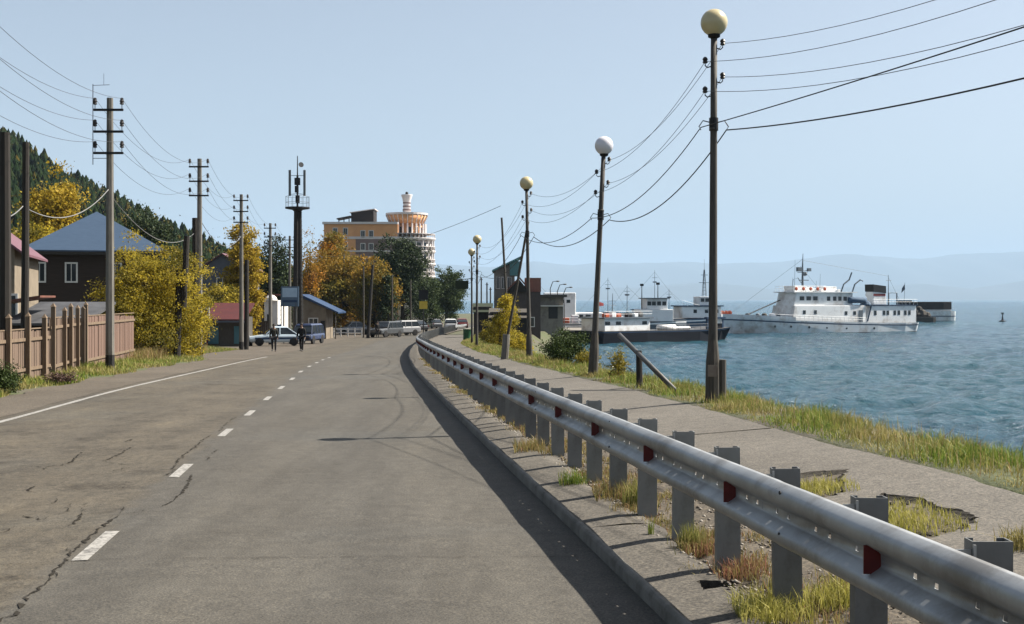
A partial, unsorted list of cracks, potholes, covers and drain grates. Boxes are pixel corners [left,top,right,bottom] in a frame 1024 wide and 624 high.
pothole [815,493,979,539]
crack [0,416,566,622]
